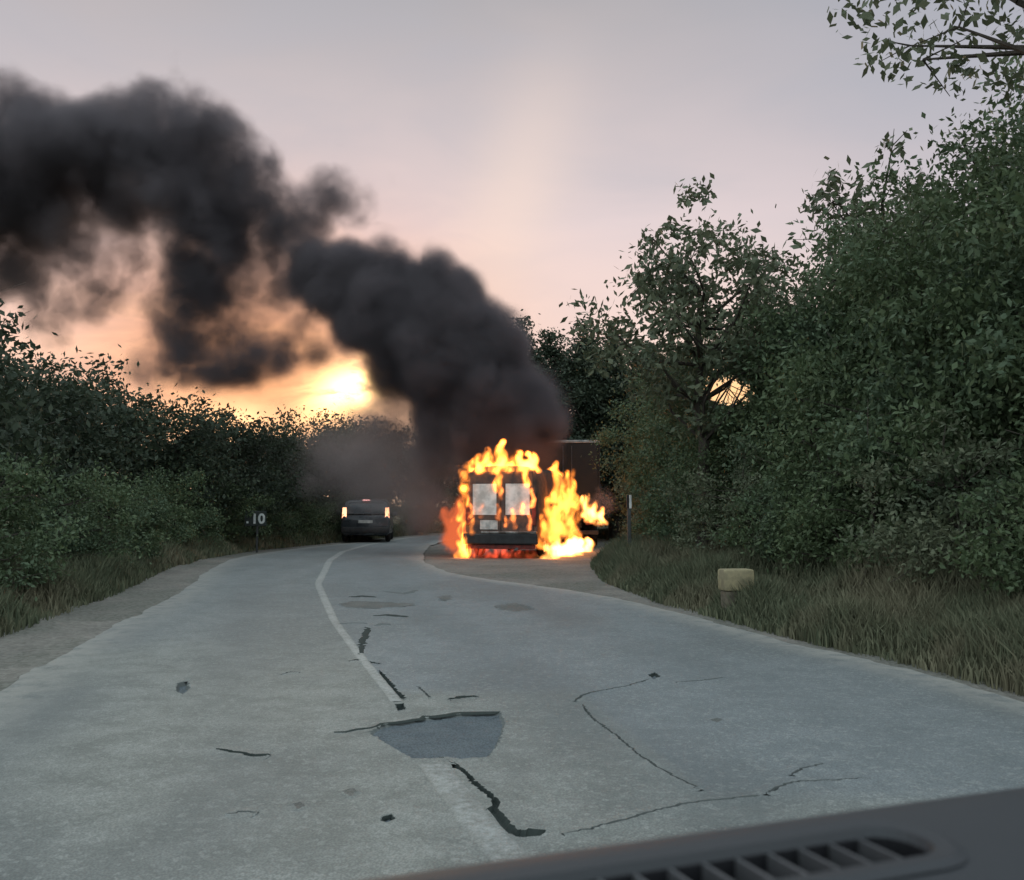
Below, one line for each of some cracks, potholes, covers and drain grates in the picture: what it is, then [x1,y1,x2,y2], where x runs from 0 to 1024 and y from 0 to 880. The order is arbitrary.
crack [565,678,656,702]
crack [225,806,260,821]
crack [209,746,271,762]
pothole [356,710,517,765]
crack [434,756,875,844]
crack [334,614,500,733]
